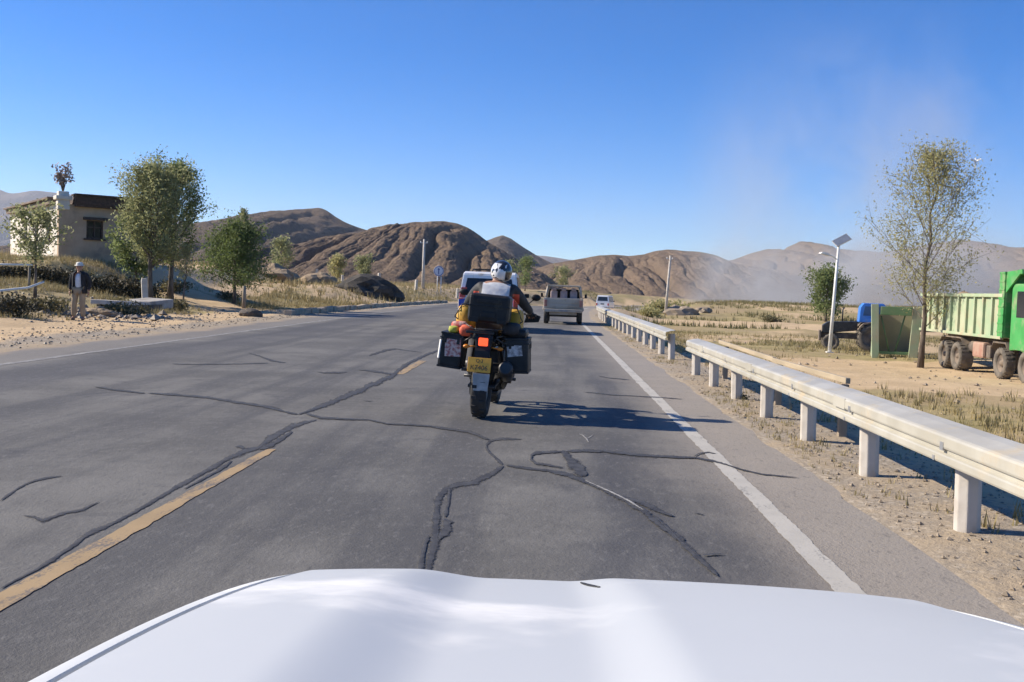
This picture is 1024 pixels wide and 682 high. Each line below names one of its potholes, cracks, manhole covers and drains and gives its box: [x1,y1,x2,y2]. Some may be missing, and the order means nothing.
crack [369,348,417,356]
crack [1,476,98,522]
